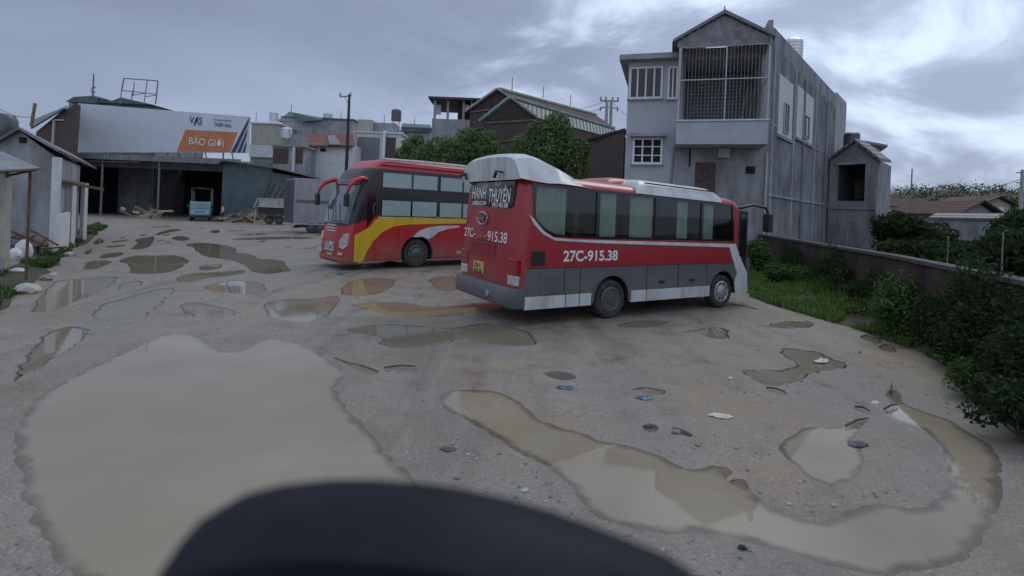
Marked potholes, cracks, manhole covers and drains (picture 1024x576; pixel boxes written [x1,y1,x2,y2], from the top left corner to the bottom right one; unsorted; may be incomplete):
pothole [428,276,457,291]
pothole [31,276,118,312]
pothole [347,323,537,348]
pothole [683,326,730,339]
pothole [340,278,395,296]
pothole [179,302,236,318]
pothole [186,243,292,274]
pothole [119,255,189,274]
pothole [632,387,666,395]
pothole [332,357,379,377]
pothole [764,320,814,329]
pothole [543,371,576,380]
